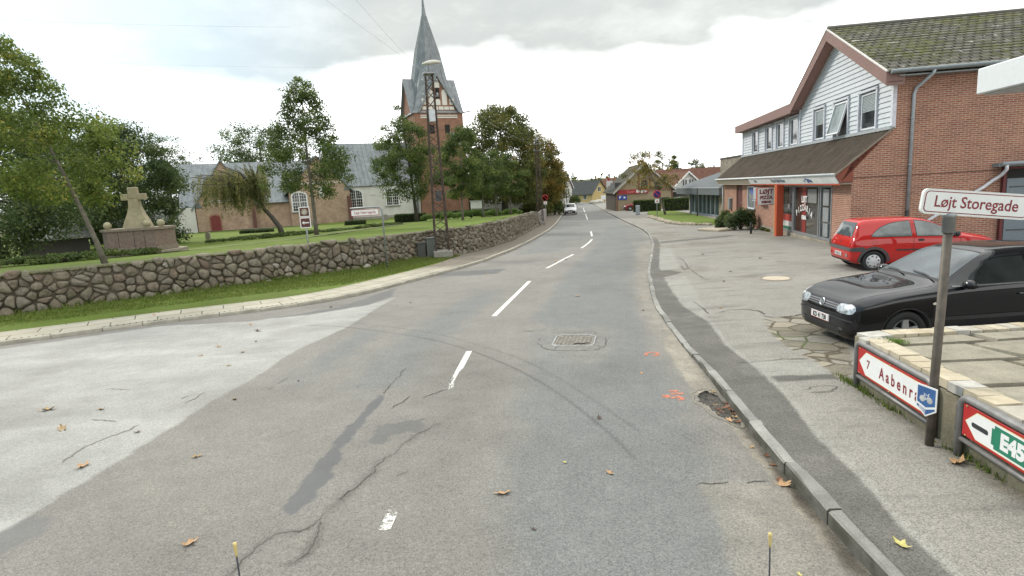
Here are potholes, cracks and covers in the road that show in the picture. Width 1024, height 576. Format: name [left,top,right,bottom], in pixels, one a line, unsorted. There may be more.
pothole [691,388,745,428]
crack [62,419,140,463]
crack [230,427,431,574]
